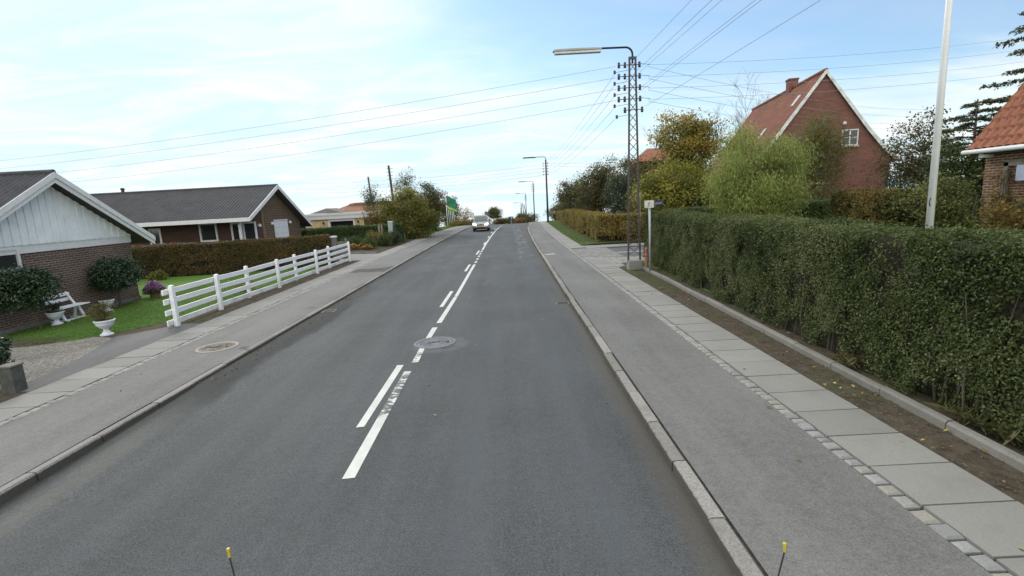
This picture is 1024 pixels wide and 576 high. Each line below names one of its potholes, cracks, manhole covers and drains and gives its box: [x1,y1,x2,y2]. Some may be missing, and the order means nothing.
manhole cover [195,341,239,353]
manhole cover [414,337,456,349]
